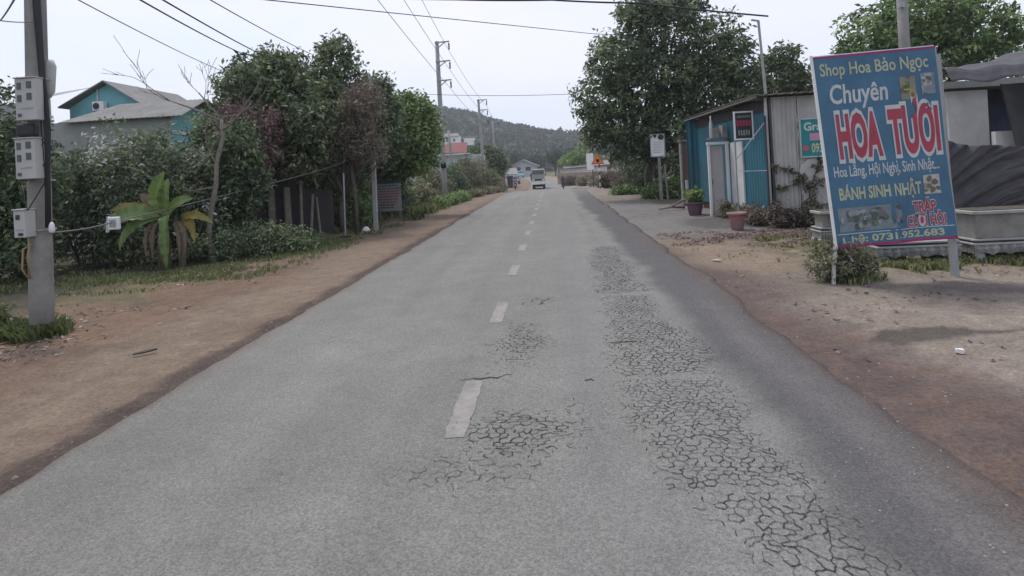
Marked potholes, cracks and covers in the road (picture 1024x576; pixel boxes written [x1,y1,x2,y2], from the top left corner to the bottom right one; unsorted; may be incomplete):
crack [587,246,723,377]
crack [613,377,916,576]
crack [376,397,605,502]
crack [463,323,558,381]
